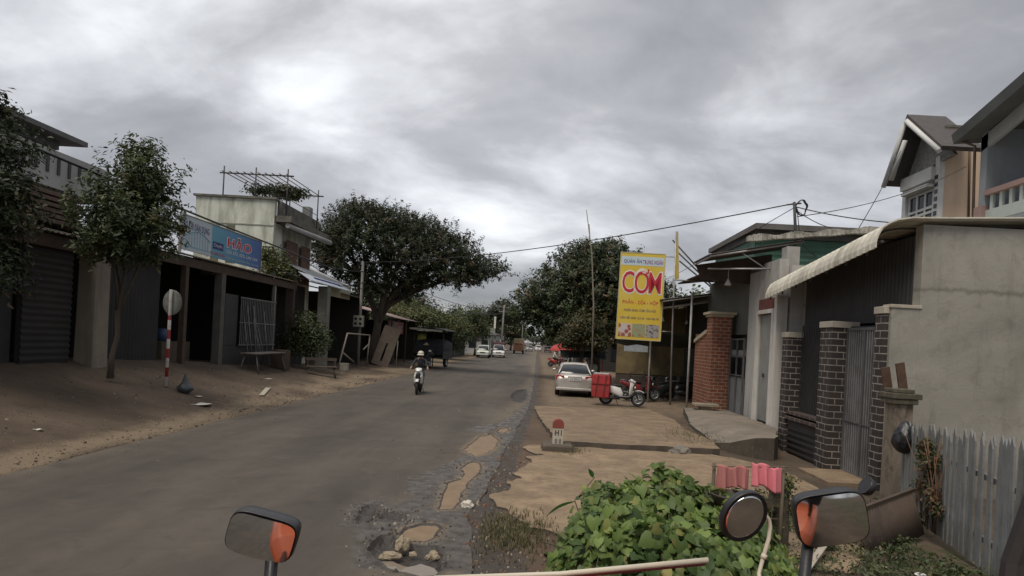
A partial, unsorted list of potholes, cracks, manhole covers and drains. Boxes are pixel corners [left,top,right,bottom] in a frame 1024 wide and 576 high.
pothole [436,461,483,510]
pothole [465,434,499,456]
pothole [364,534,445,576]
pothole [398,523,443,542]
